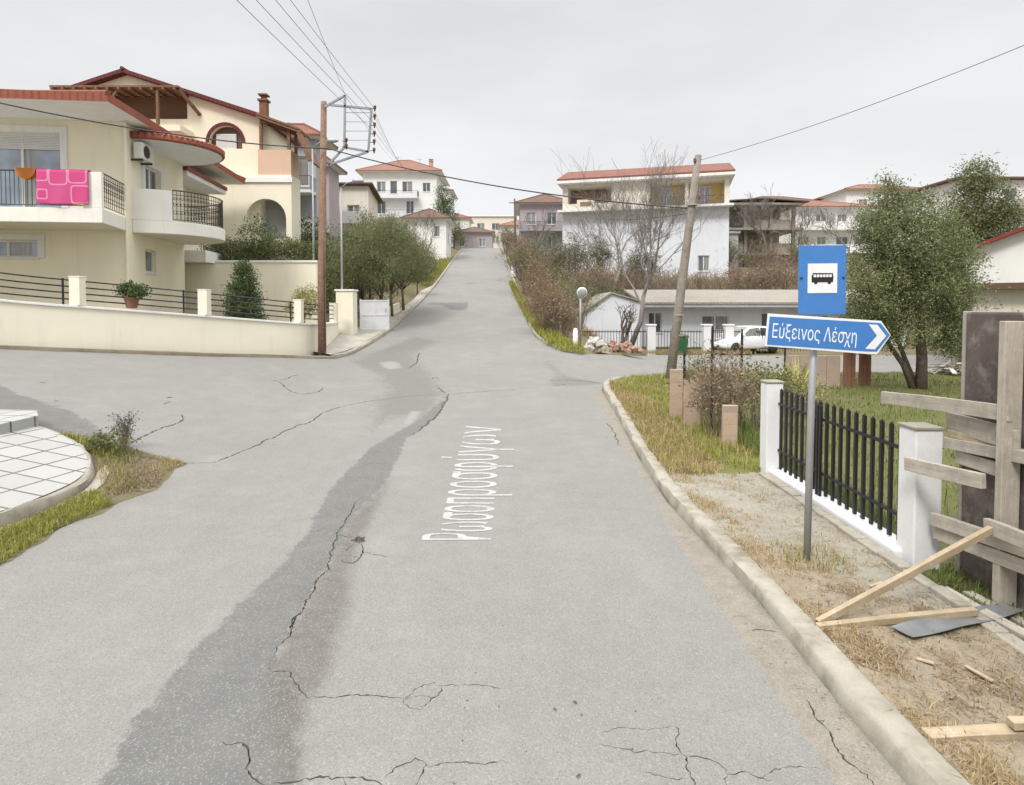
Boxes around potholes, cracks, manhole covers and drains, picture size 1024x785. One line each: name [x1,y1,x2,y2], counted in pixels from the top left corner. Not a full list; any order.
crack [269,499,503,710]
crack [223,742,509,785]
crack [208,352,523,463]
crack [600,726,823,785]
crack [806,700,874,785]
crack [130,397,184,445]
